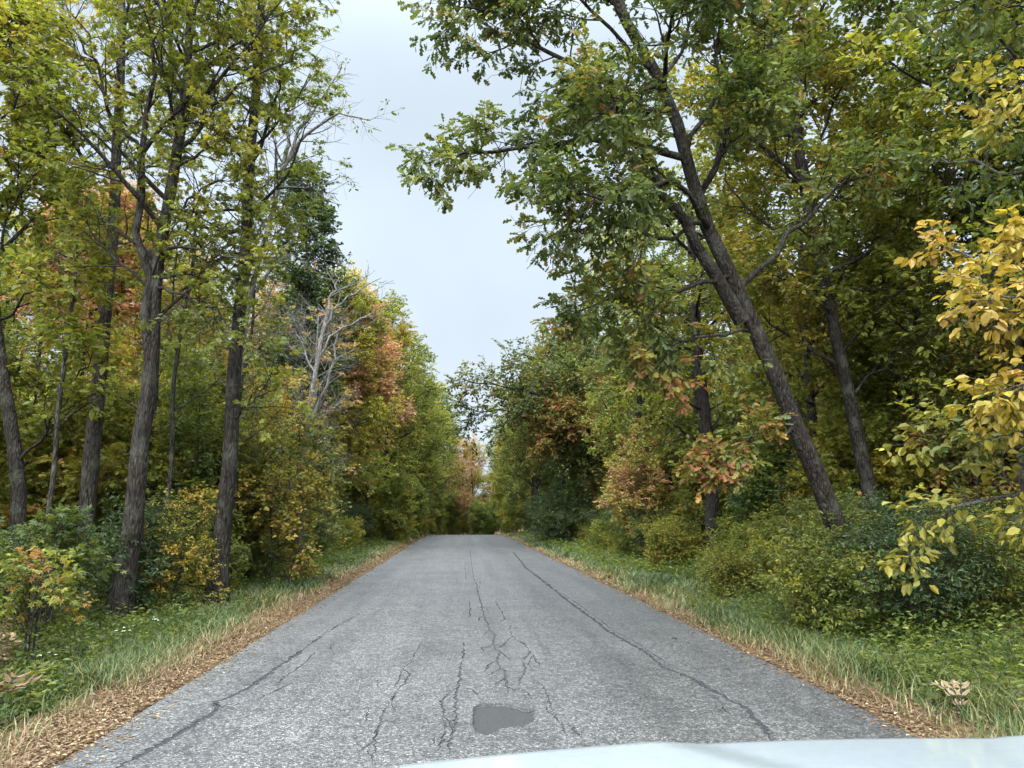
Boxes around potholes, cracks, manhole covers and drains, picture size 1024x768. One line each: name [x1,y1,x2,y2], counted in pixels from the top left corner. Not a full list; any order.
crack [357,554,582,766]
crack [116,615,357,768]
pothole [469,702,538,735]
